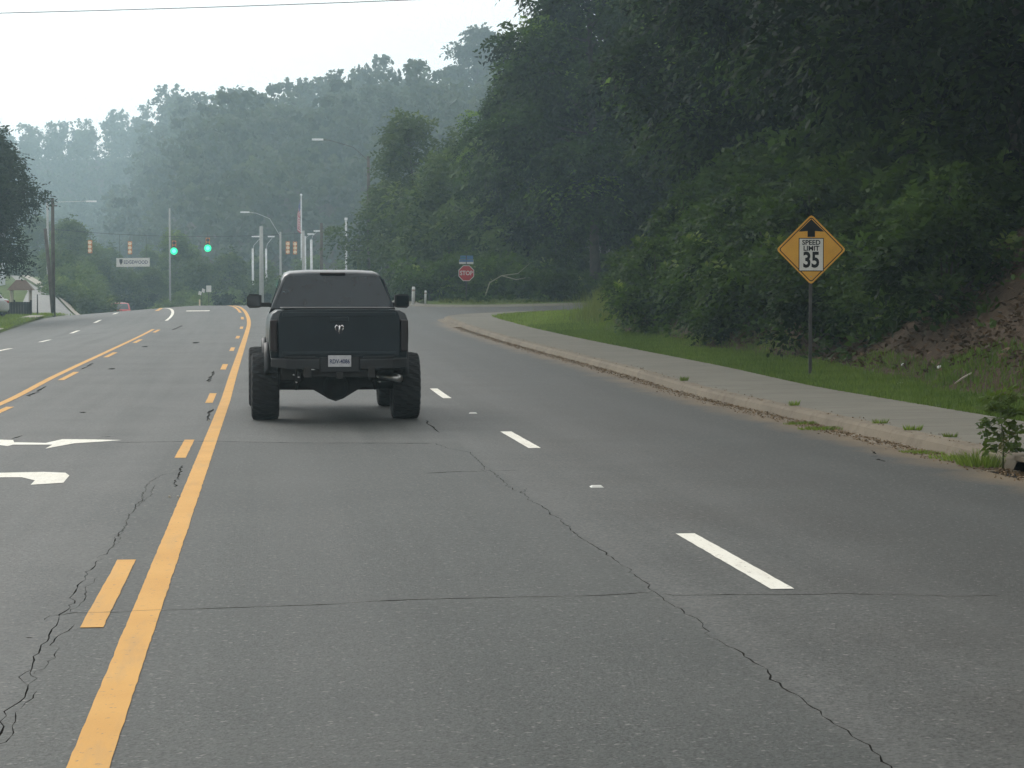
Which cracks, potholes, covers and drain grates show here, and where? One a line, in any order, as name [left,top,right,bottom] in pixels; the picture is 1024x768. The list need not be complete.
crack [0,450,1004,768]
